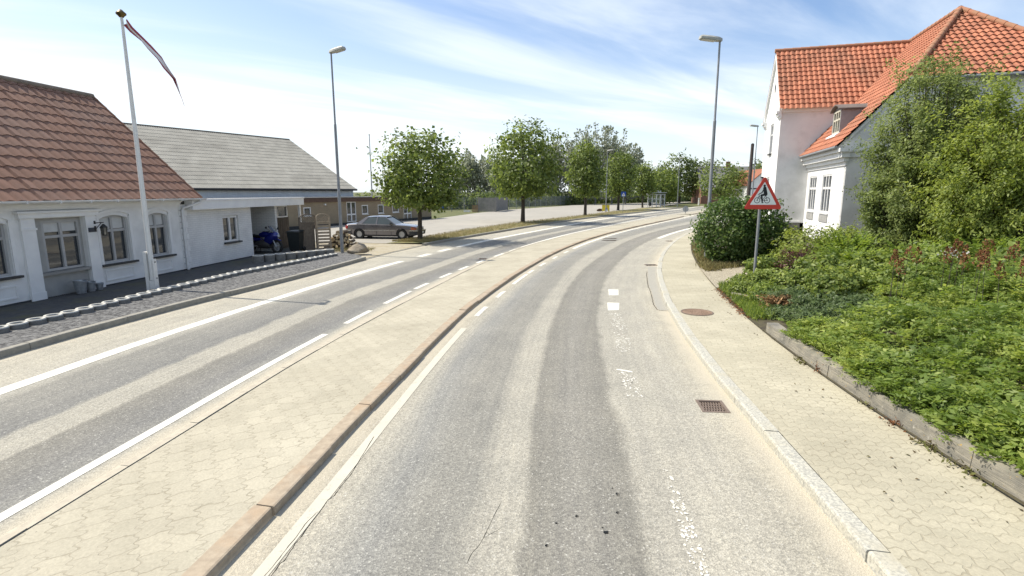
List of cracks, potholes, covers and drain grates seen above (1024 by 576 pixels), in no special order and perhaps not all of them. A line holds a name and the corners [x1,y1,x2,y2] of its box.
drain grate [695,399,731,413]
